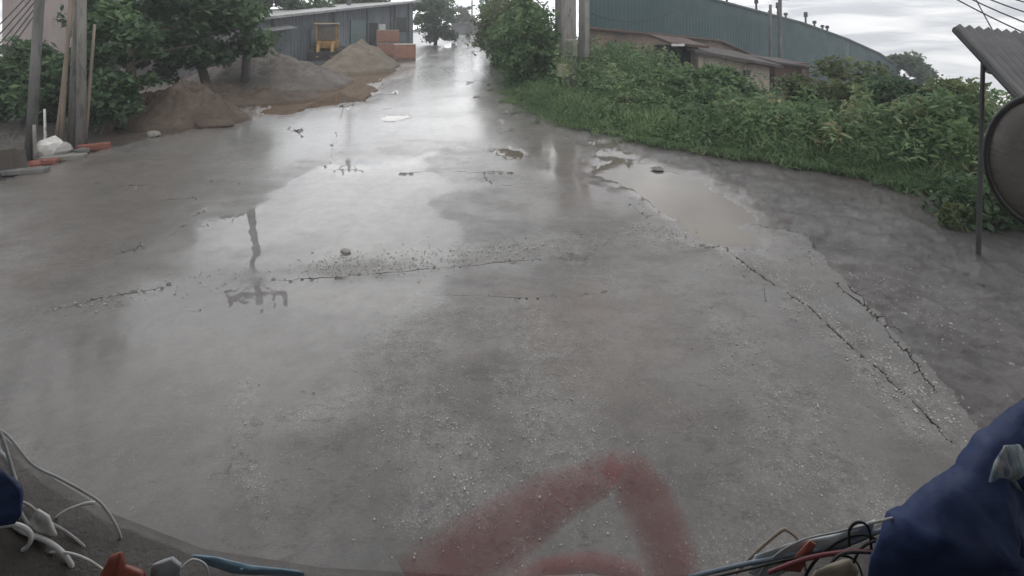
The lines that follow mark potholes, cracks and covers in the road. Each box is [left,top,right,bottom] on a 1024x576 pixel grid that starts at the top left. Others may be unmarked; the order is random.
crack [727,250,952,443]
